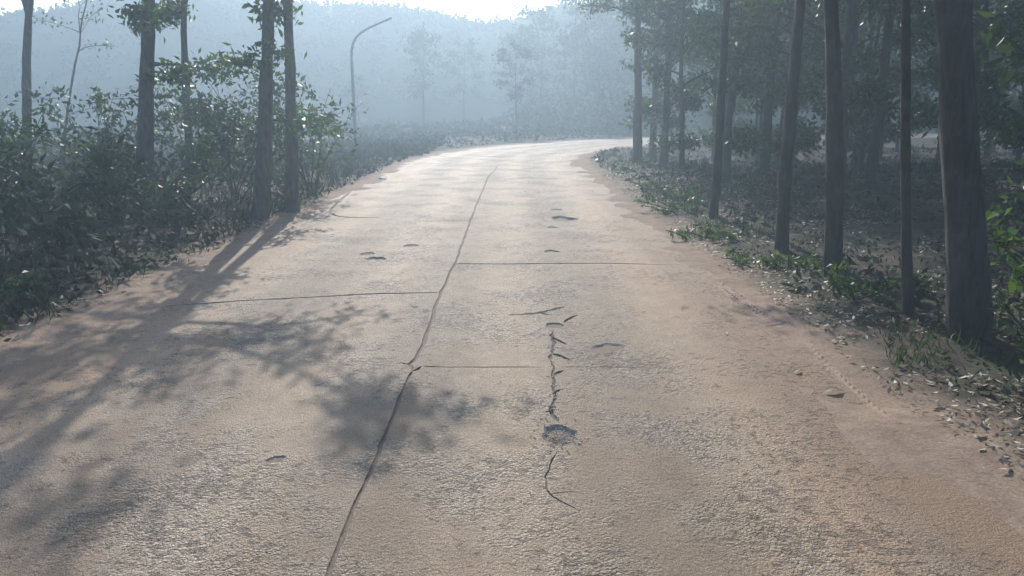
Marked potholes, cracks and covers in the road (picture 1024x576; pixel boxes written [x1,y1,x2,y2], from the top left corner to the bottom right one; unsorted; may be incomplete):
pothole [529,418,589,456]
crack [544,451,579,511]
crack [511,306,577,421]
